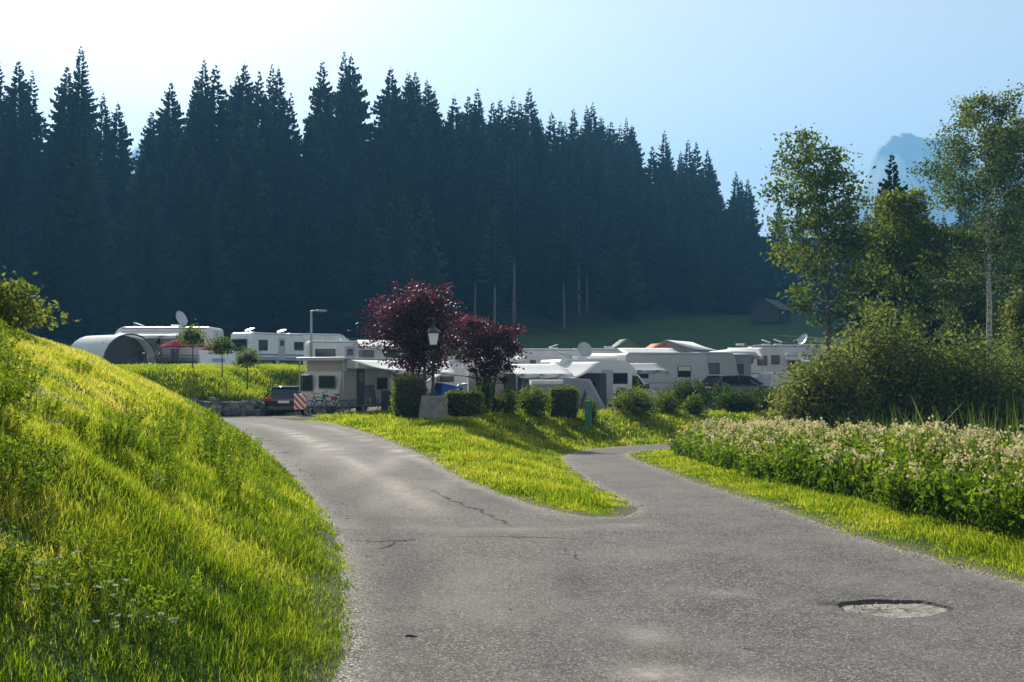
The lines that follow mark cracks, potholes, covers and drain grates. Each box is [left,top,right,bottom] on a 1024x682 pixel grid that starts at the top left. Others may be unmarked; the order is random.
crack [371,539,416,549]
crack [432,490,590,561]
